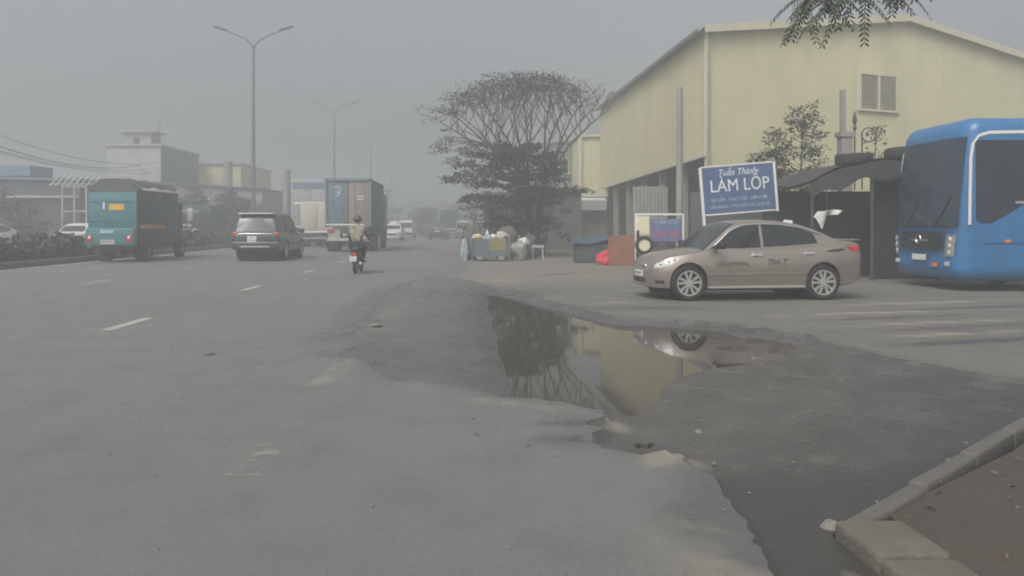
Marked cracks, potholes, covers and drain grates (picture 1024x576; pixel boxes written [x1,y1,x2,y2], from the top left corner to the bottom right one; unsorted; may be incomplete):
pothole [337,275,807,397]
